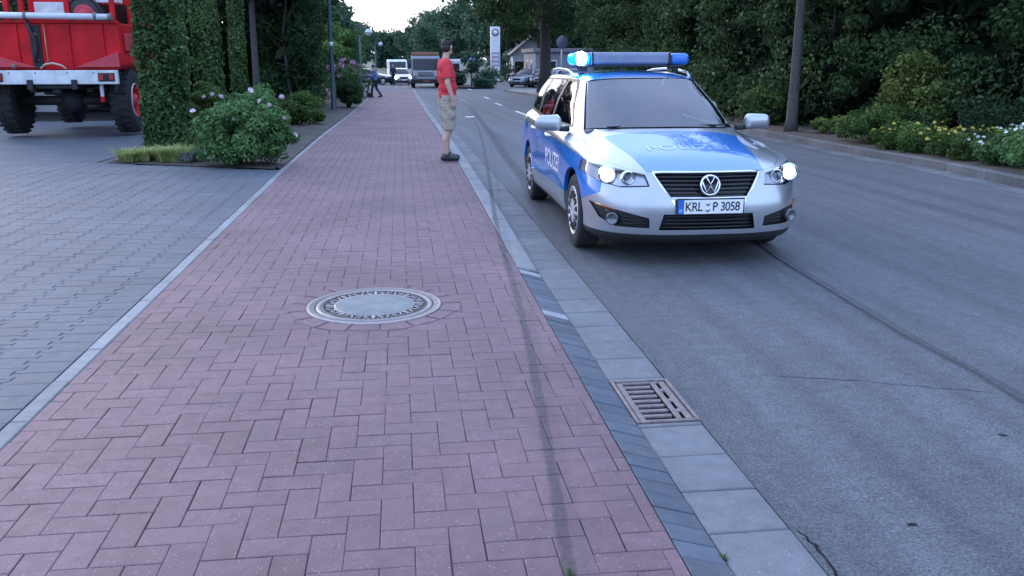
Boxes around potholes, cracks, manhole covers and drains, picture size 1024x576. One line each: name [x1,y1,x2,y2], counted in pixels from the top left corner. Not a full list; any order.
drain grate [610,378,701,425]
manhole cover [288,284,461,331]
crack [763,375,994,393]
crack [797,530,838,576]
